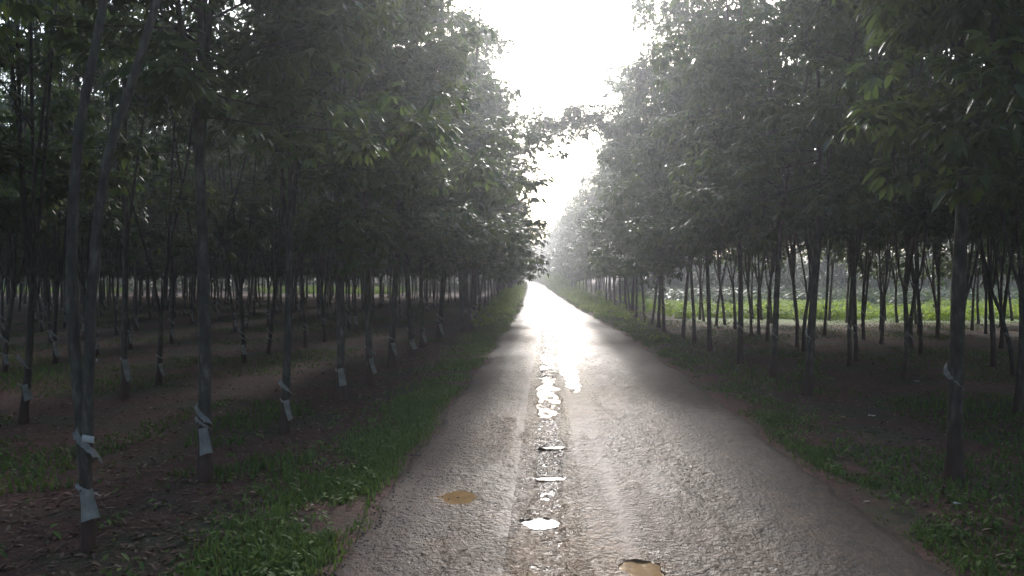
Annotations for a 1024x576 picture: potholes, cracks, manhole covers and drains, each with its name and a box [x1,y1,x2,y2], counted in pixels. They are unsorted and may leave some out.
pothole [513,516,567,534]
pothole [610,557,674,576]
pothole [428,487,485,506]
